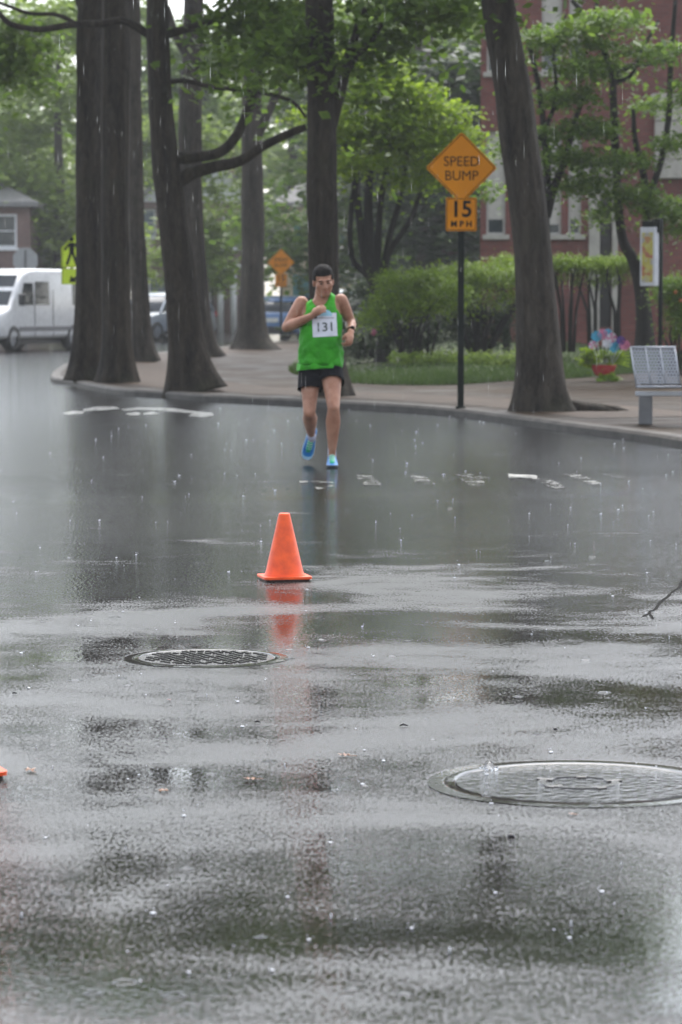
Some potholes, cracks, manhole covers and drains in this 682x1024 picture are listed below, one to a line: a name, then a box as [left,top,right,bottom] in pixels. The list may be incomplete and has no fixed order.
manhole cover [427,760,682,808]
manhole cover [124,649,288,668]
